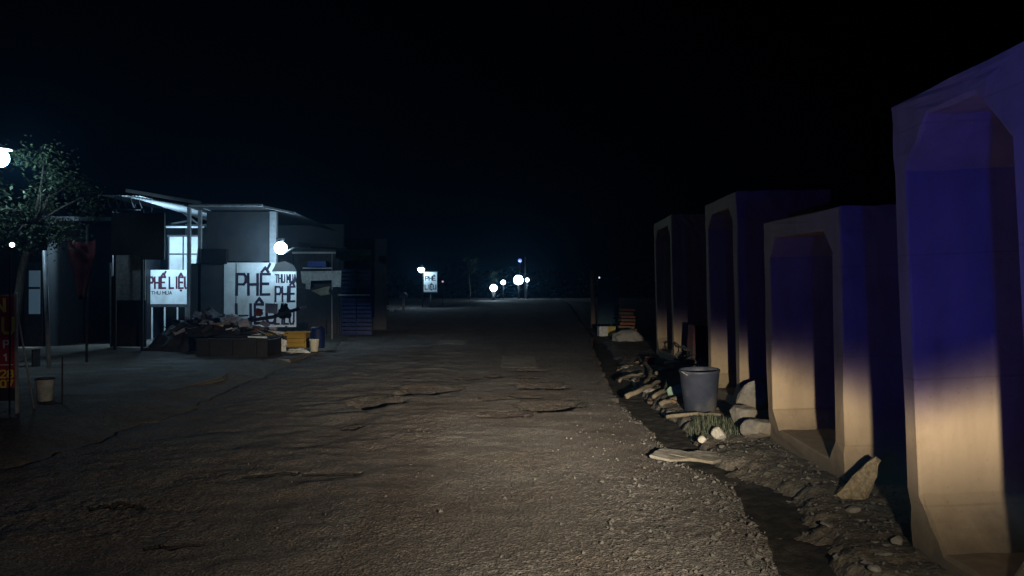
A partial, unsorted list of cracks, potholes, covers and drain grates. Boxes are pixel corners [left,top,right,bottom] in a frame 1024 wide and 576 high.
pothole [510,399,590,414]
pothole [391,382,467,396]
pothole [474,411,534,419]
pothole [510,381,574,391]
pothole [341,394,412,411]
